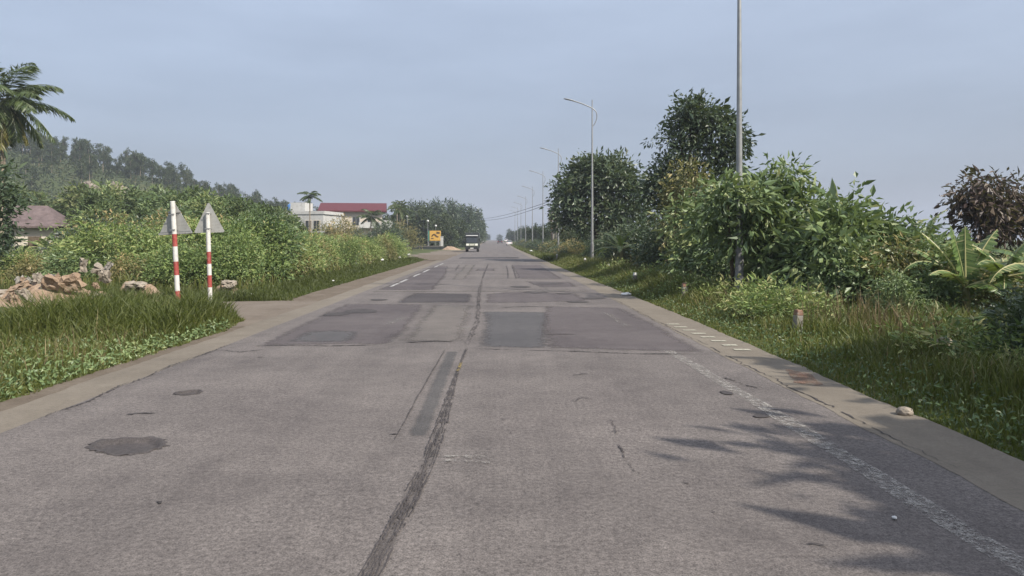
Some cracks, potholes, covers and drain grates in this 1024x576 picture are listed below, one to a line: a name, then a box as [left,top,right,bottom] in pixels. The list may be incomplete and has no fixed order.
crack [358,264,488,576]
crack [608,420,638,472]
